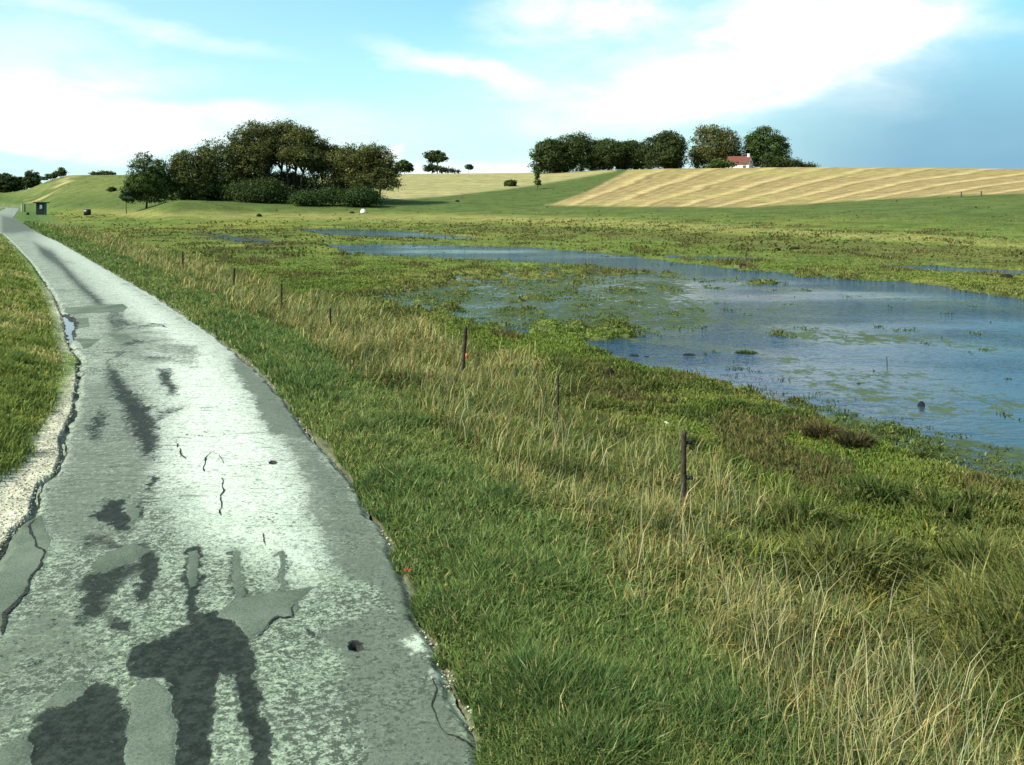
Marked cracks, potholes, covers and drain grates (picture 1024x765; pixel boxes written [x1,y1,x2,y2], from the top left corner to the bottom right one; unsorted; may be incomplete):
pothole [63,314,80,344]
crack [431,677,472,747]
pothole [347,640,365,652]
crack [203,452,225,515]
